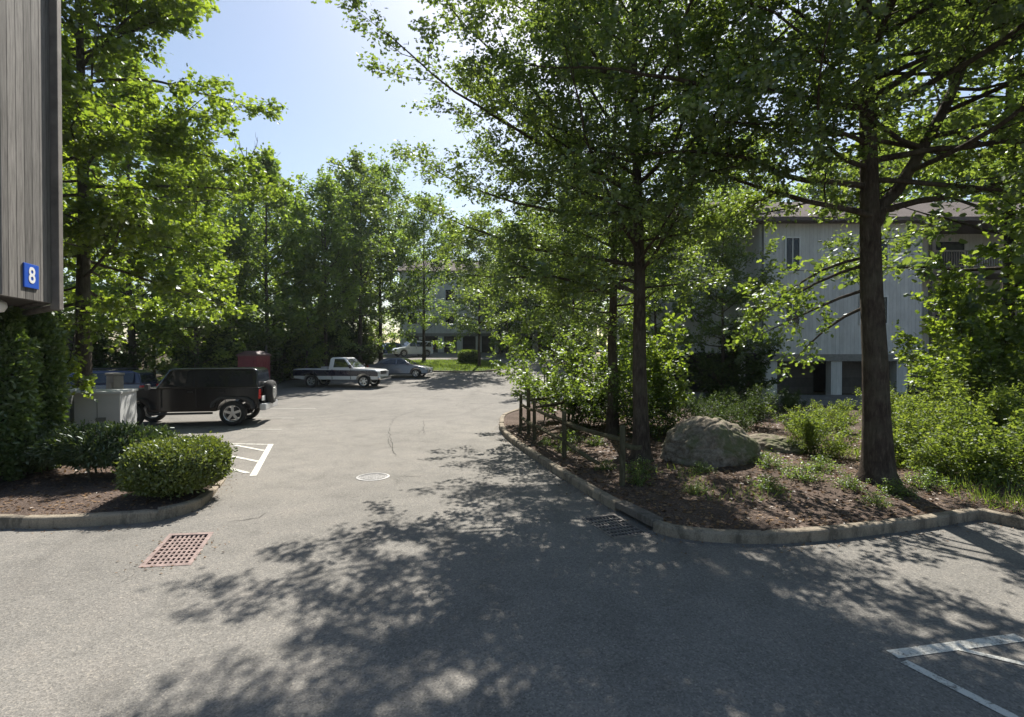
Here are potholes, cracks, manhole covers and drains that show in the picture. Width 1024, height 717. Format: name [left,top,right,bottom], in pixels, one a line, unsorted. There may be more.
drain grate [581,500,663,540]
manhole cover [356,473,390,481]
drain grate [138,532,214,568]
